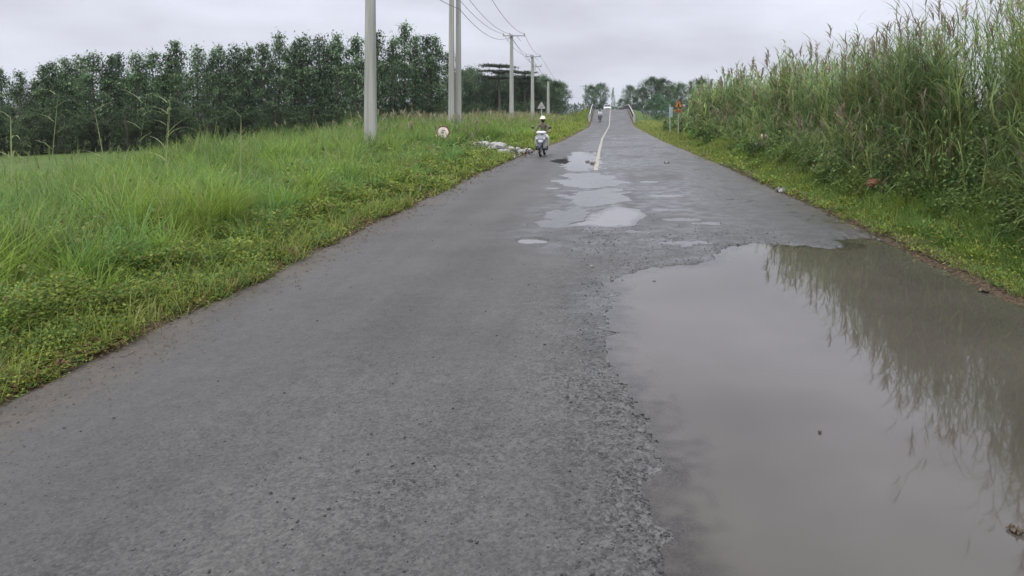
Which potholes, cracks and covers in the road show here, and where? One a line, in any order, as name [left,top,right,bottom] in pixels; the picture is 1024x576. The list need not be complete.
pothole [513,236,553,244]
pothole [596,236,1024,576]
